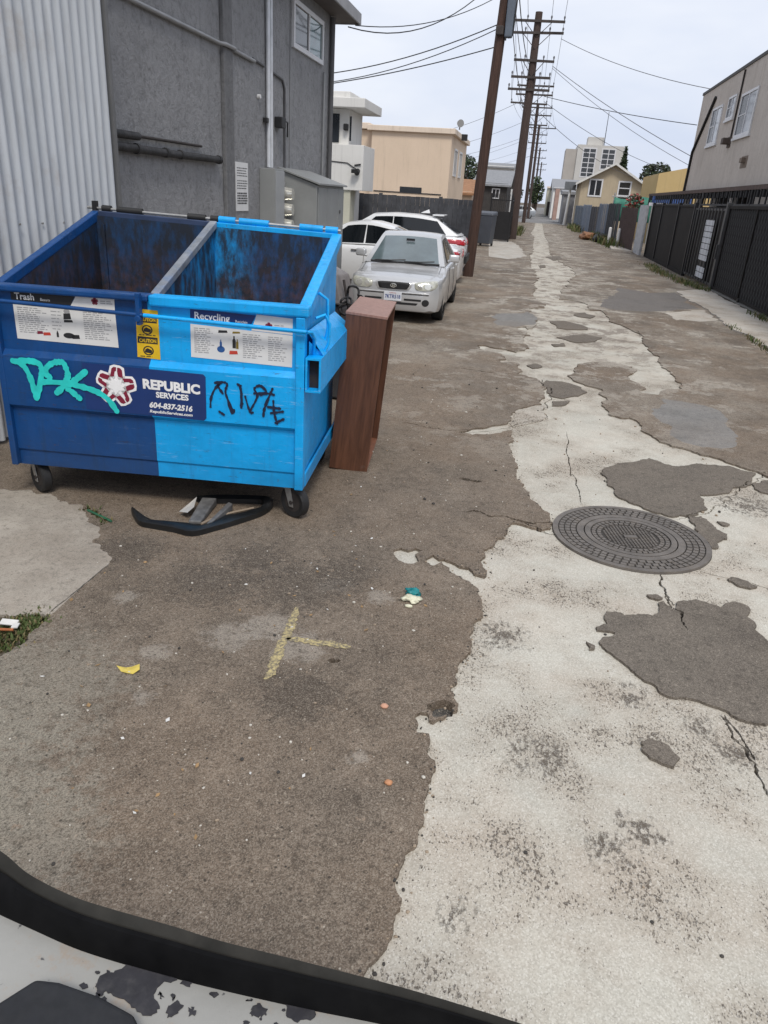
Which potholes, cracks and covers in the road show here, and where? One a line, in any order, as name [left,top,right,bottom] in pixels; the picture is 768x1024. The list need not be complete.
pothole [432,708,452,718]
manhole cover [552,506,712,576]
